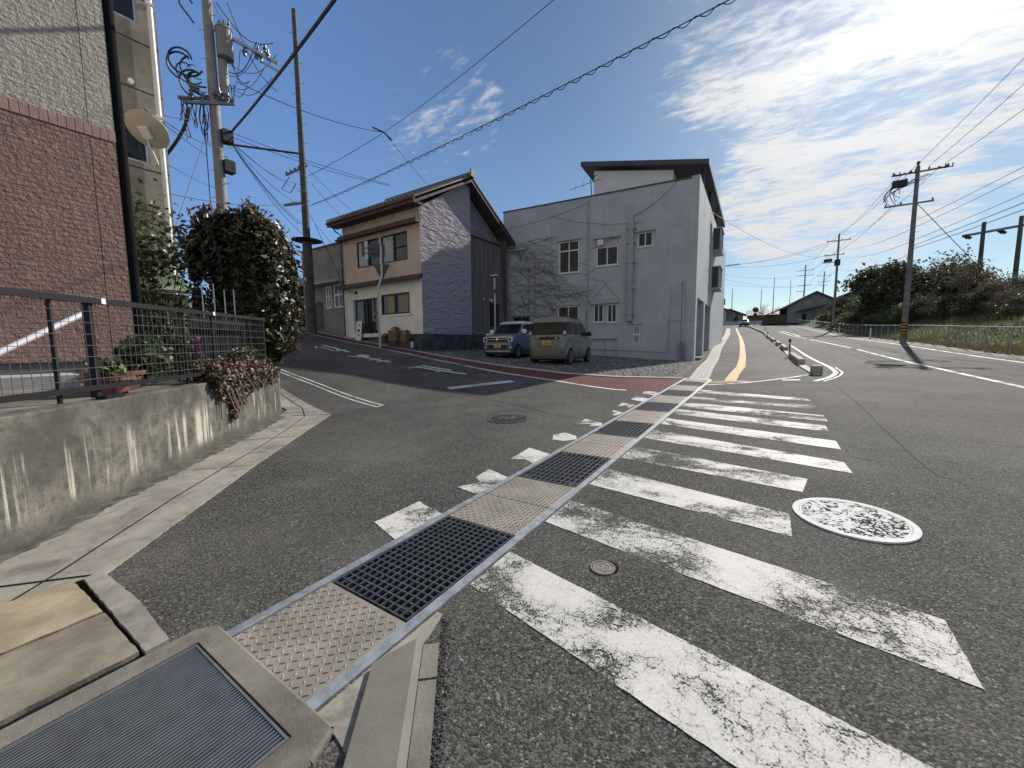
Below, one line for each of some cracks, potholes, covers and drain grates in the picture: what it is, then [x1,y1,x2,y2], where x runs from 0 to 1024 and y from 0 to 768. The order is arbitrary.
manhole cover [590,560,619,576]
drain grate [0,644,290,768]
manhole cover [792,498,922,544]
drain grate [594,420,654,438]
drain grate [333,516,514,623]
manhole cover [488,414,529,424]
drain grate [519,451,611,488]
